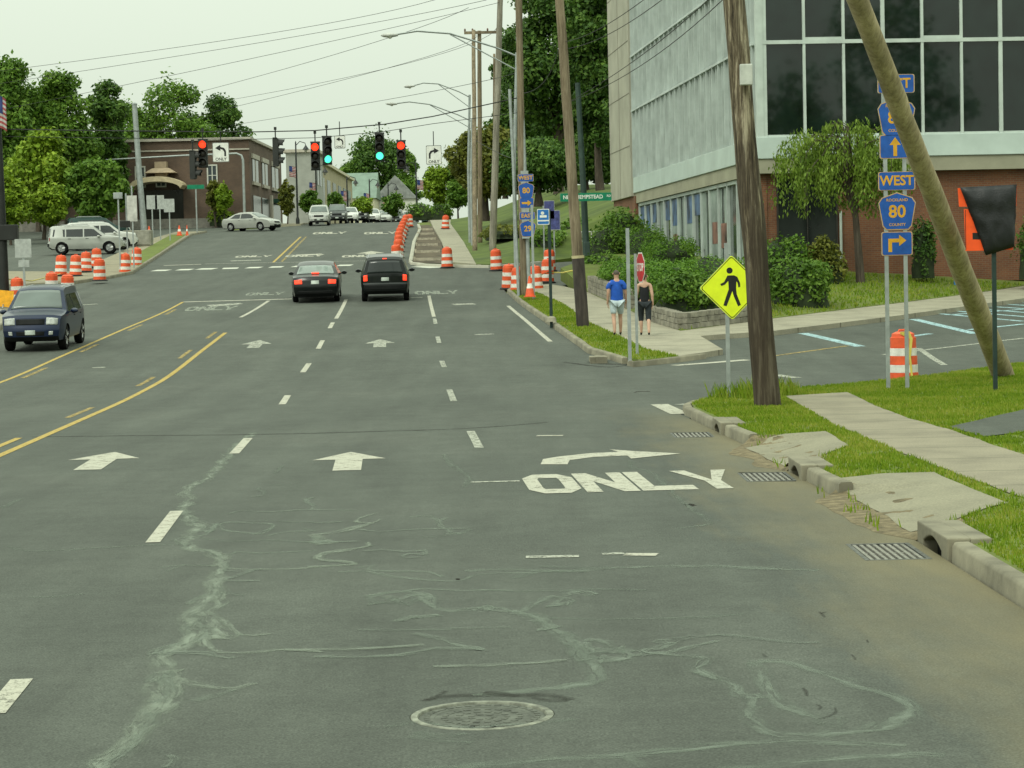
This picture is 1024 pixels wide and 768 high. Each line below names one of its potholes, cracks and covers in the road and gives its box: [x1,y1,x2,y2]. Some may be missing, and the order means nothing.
crack [424,660,929,768]
crack [44,433,450,768]
manhole cover [410,700,554,731]
crack [296,570,814,695]
crack [475,565,818,577]
